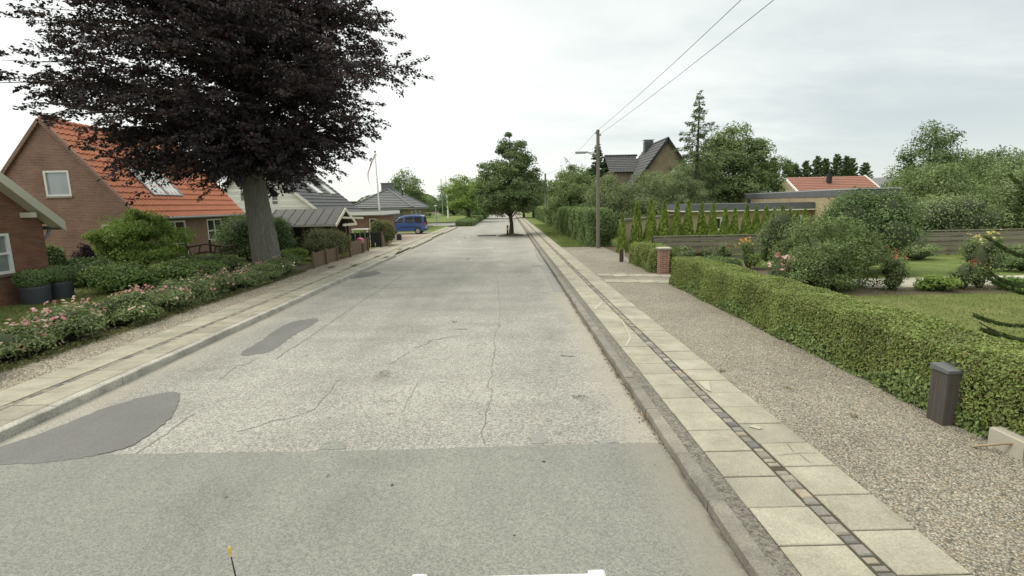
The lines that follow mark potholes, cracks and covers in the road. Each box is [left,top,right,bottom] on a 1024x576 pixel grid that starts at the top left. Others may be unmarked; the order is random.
crack [477,279,501,444]
